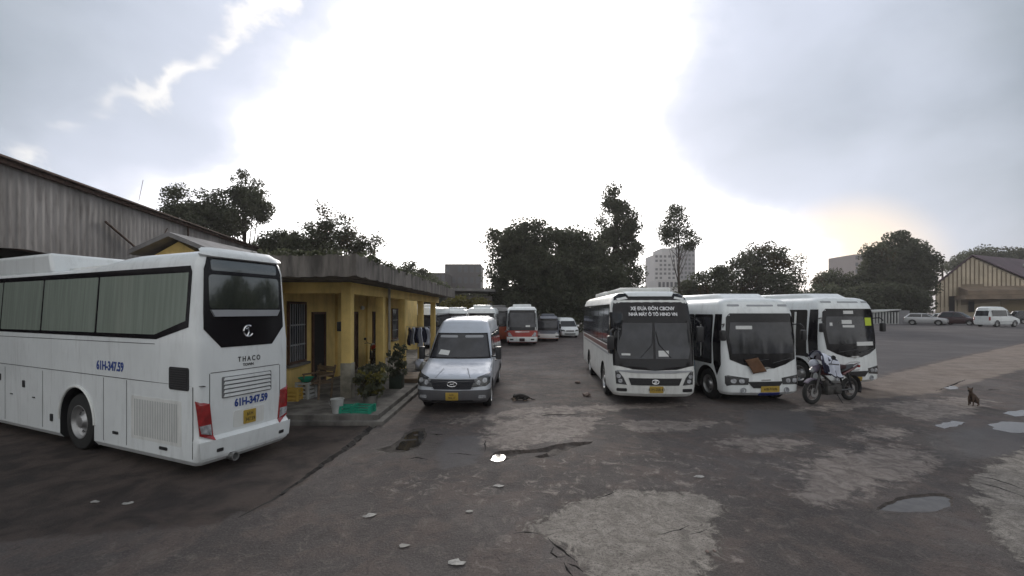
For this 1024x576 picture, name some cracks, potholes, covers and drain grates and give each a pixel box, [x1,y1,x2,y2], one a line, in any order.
crack [514,532,583,576]
pothole [376,428,427,453]
pothole [876,493,953,511]
